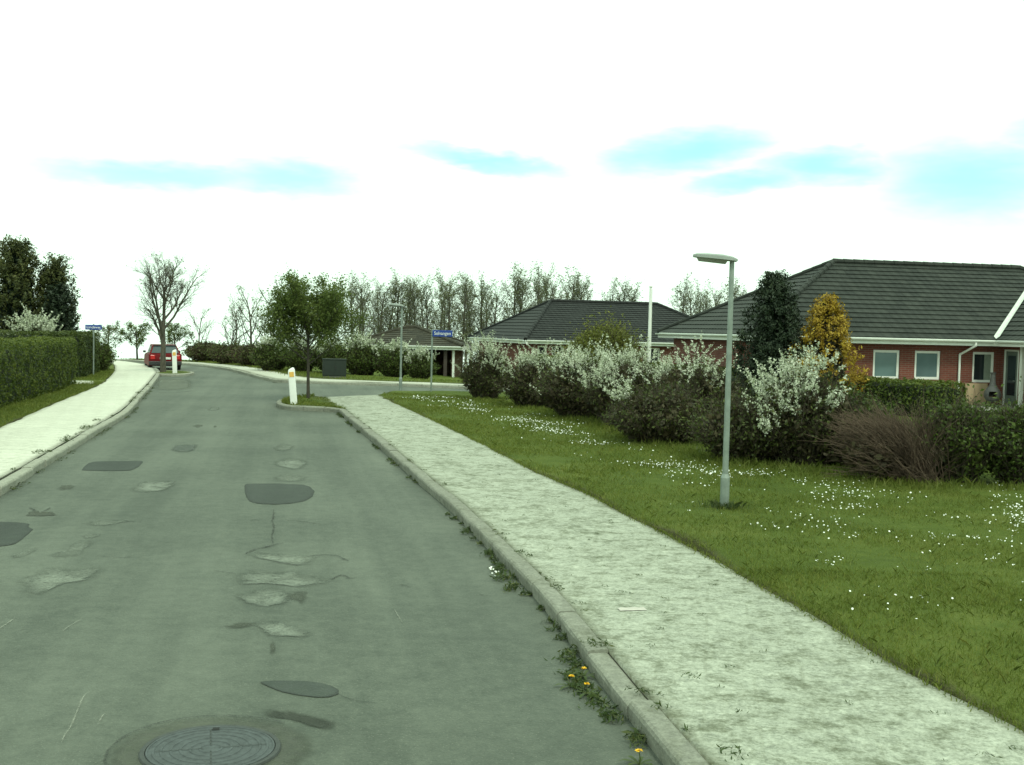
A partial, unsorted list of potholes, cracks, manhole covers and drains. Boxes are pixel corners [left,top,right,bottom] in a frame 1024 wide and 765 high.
pothole [134,481,172,492]
pothole [241,589,288,606]
pothole [23,569,98,593]
pothole [276,459,306,469]
pothole [256,622,307,636]
pothole [254,553,314,564]
pothole [240,572,322,586]
manhole cover [138,724,281,765]
